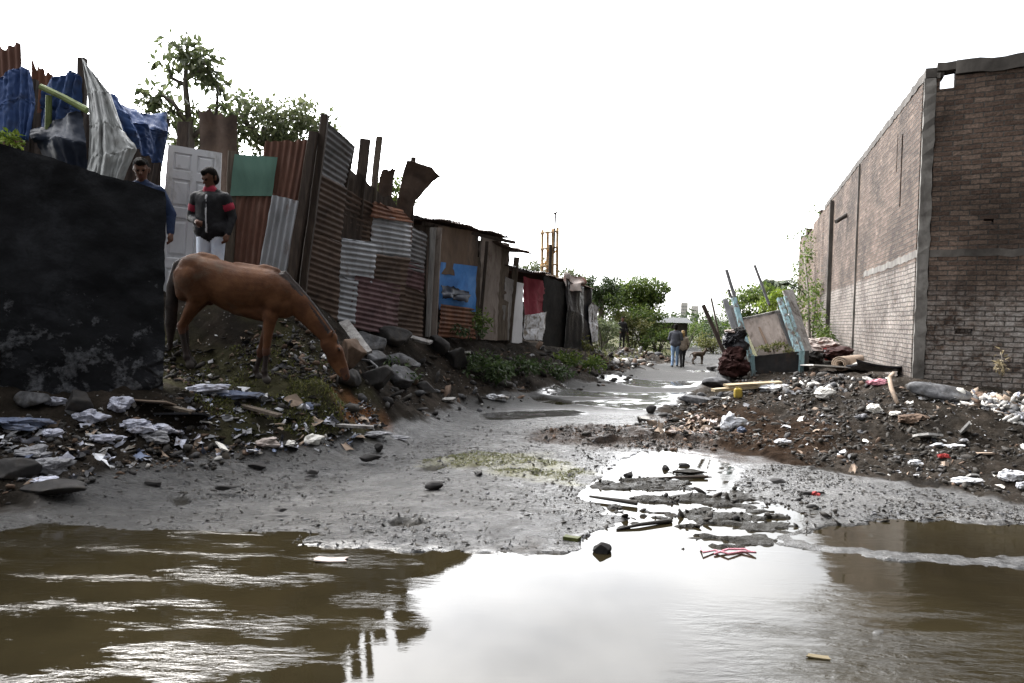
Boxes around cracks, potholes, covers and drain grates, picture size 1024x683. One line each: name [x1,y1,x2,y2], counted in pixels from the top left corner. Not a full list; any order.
pothole [0,449,1024,683]
